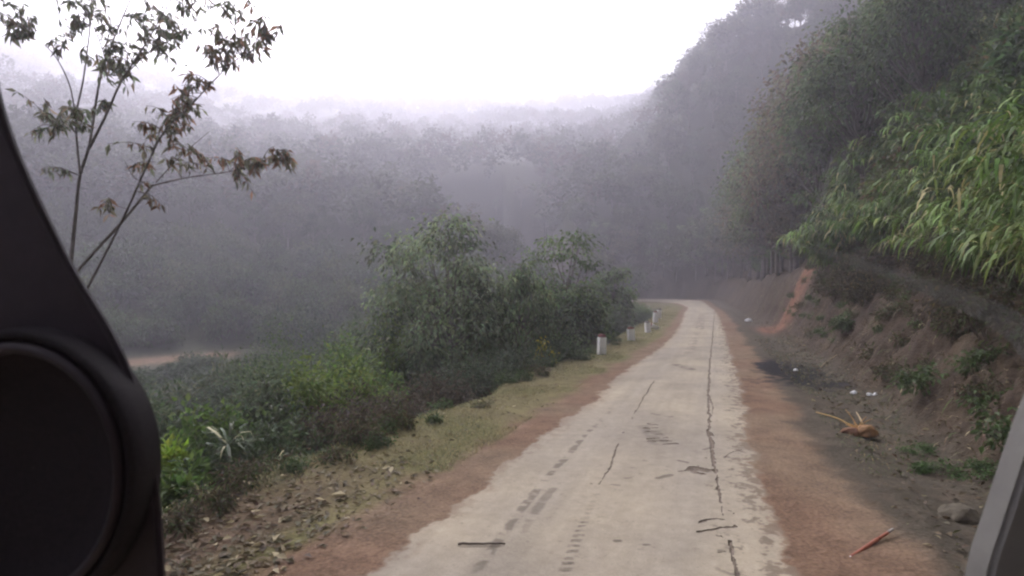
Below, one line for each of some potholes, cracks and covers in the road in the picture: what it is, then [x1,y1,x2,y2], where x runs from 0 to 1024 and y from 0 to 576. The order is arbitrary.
crack [696,315,742,576]
crack [590,382,679,484]
